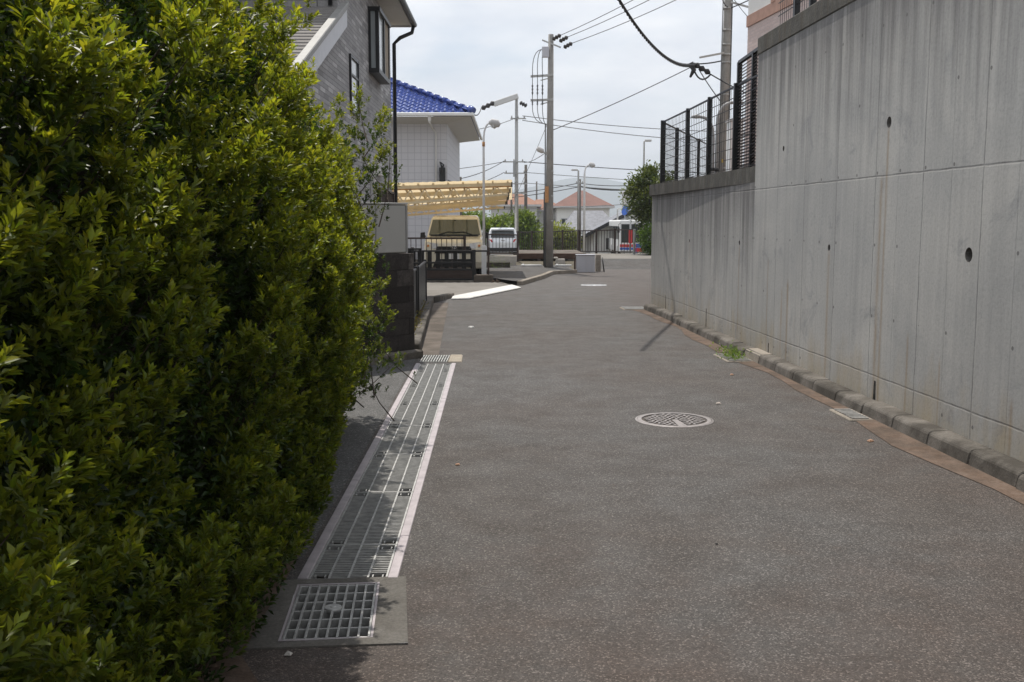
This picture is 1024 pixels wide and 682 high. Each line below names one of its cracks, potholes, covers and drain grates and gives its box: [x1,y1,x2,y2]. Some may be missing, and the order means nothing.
drain grate [374,425,433,454]
drain grate [829,409,873,421]
drain grate [326,492,413,545]
drain grate [309,544,397,579]
manhole cover [635,412,714,428]
drain grate [410,370,450,385]
drain grate [282,583,377,640]
drain grate [400,385,445,403]
drain grate [354,454,424,492]
drain grate [389,403,440,426]
